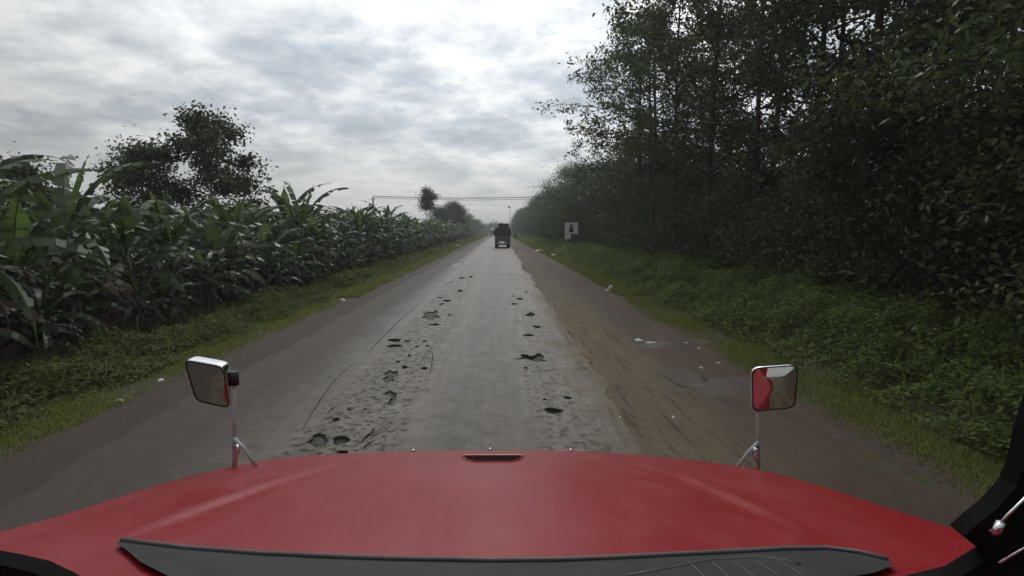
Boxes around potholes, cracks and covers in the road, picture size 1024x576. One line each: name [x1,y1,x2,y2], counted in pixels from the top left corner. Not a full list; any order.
pothole [382,370,398,383]
pothole [332,435,351,444]
pothole [421,310,440,321]
pothole [517,353,546,362]
pothole [306,433,330,446]
pothole [382,391,398,405]
